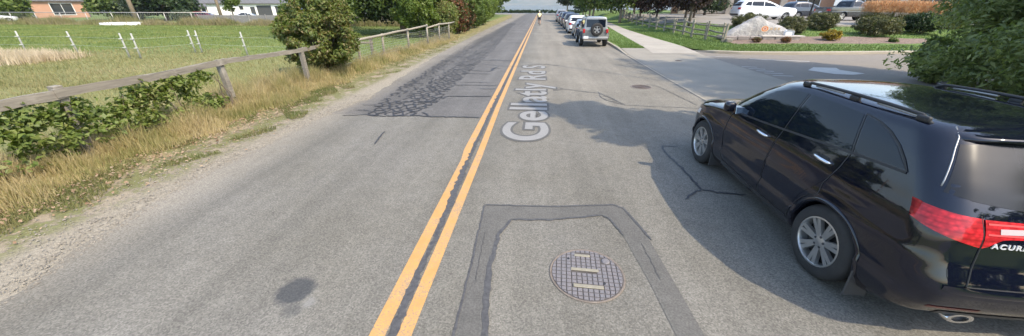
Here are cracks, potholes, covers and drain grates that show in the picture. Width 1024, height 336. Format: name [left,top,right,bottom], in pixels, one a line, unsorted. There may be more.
crack [553,84,696,108]
manhole cover [549,249,626,303]
